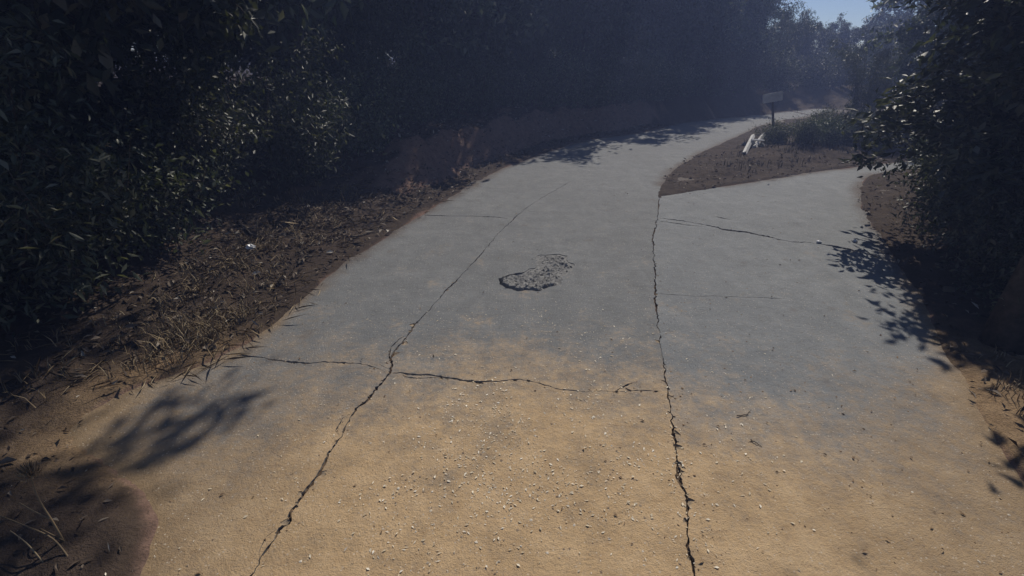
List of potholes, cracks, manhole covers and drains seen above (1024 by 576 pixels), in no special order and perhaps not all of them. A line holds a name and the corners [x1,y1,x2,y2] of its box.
crack [237,180,893,576]
pothole [487,249,594,295]
